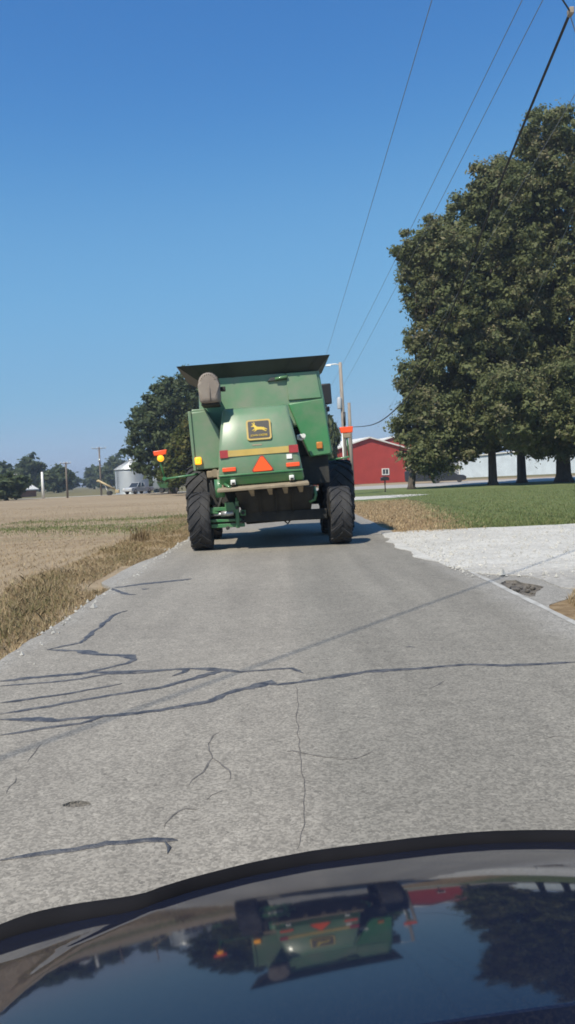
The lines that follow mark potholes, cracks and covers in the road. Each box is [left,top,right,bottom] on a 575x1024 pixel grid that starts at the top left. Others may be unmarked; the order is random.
pothole [62,800,91,808]
pothole [500,580,543,597]
crack [164,732,231,828]
